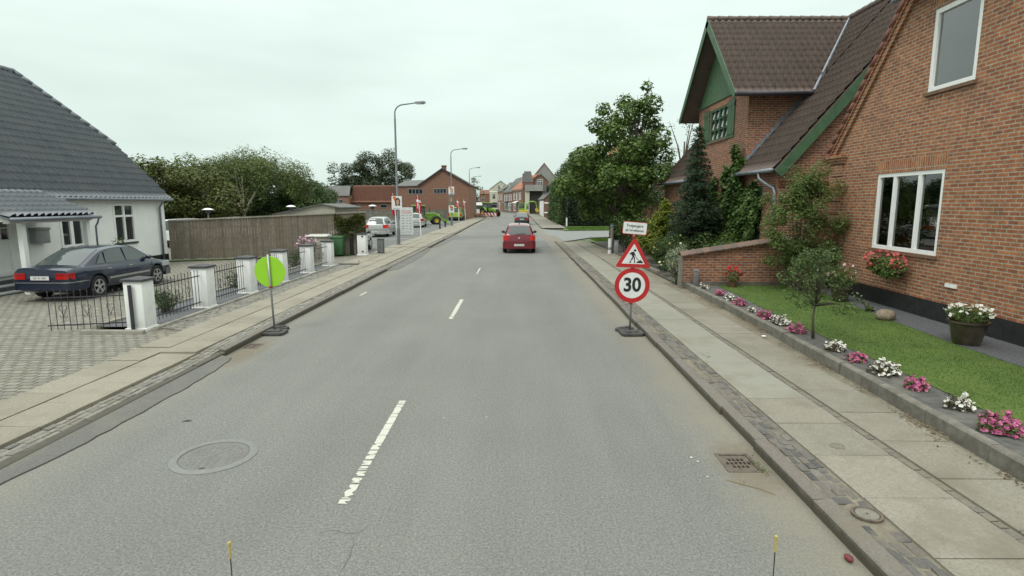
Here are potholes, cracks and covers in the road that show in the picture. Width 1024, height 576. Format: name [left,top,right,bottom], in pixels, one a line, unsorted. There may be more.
manhole cover [168,439,258,475]
drain grate [714,453,764,473]
manhole cover [850,506,884,524]
